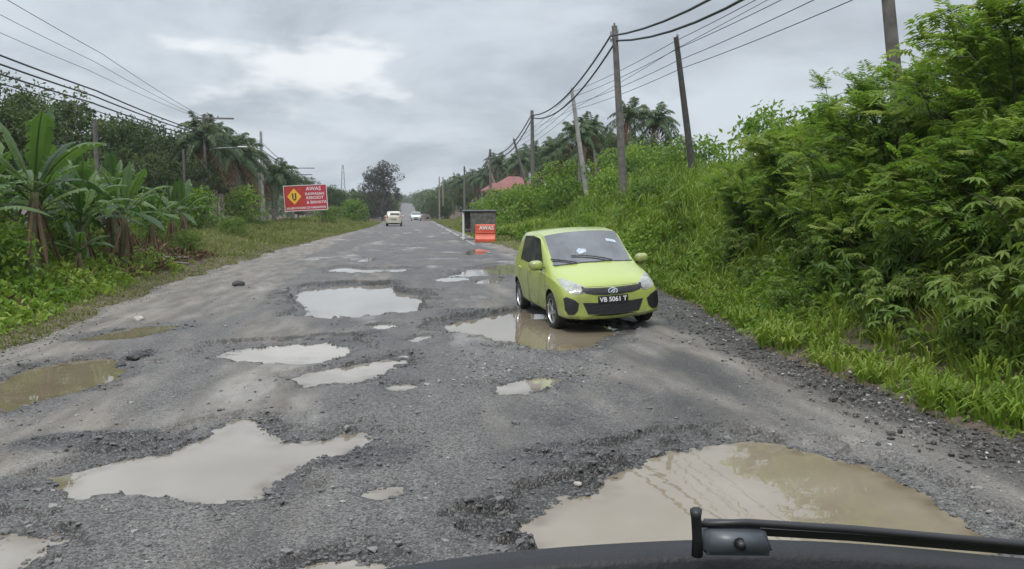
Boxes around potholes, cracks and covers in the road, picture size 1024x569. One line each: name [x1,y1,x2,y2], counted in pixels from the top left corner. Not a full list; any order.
pothole [172,331,388,368]
pothole [434,262,515,277]
pothole [50,320,209,343]
pothole [252,346,445,395]
pothole [265,279,453,320]
pothole [310,265,426,274]
pothole [0,349,170,419]
pothole [417,305,658,355]
pothole [0,502,127,569]
pothole [460,275,515,284]
